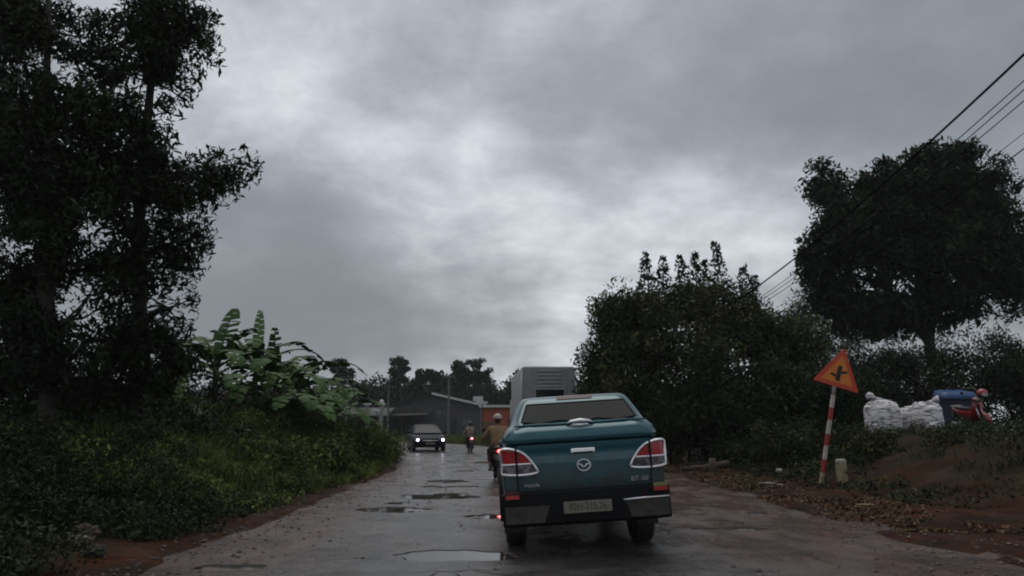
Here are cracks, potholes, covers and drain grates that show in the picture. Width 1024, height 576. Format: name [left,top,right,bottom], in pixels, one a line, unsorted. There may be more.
pothole [393,549,518,561]
